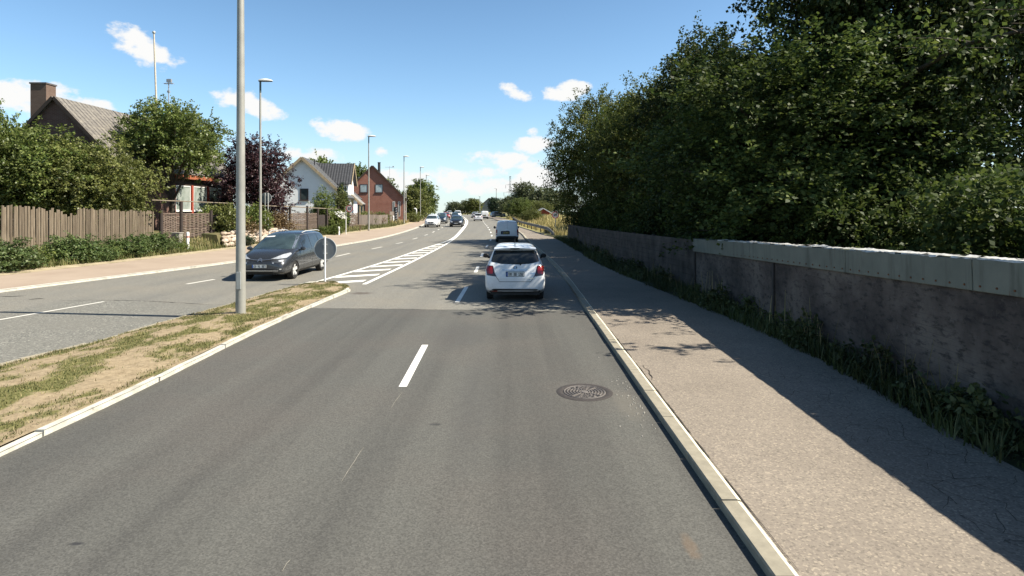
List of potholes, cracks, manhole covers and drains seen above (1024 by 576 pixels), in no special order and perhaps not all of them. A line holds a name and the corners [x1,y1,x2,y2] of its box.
manhole cover [556,384,613,401]
